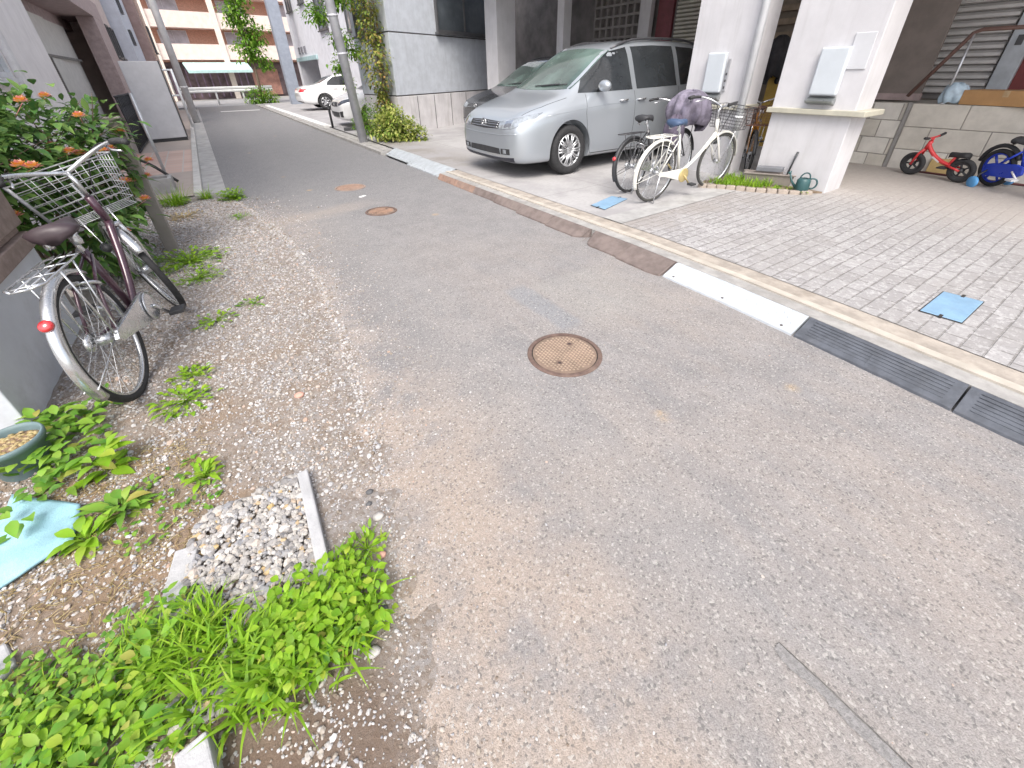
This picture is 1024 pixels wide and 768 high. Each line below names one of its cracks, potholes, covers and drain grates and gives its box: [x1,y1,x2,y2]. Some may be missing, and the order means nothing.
manhole cover [365,206,397,216]
manhole cover [527,333,602,377]
